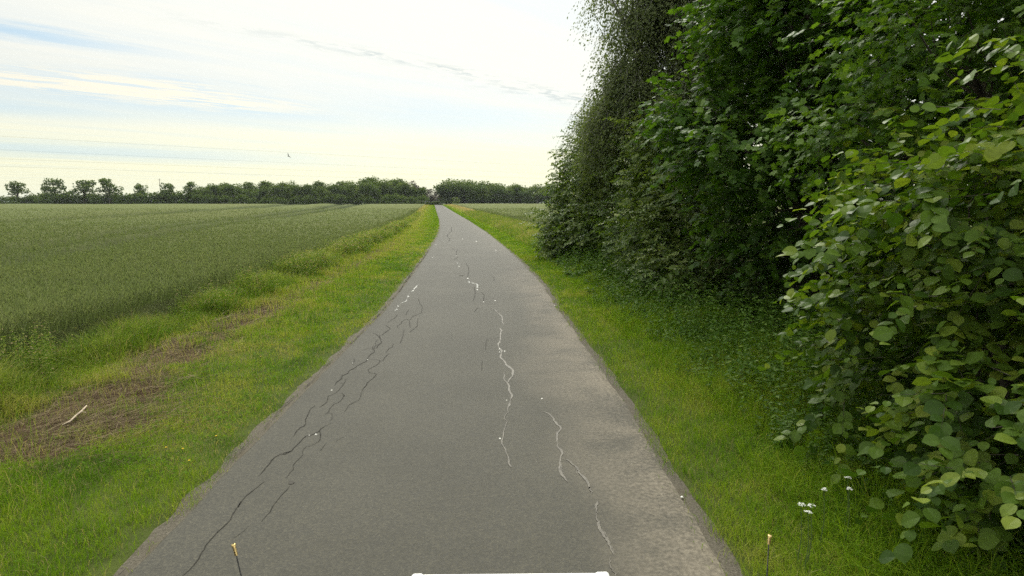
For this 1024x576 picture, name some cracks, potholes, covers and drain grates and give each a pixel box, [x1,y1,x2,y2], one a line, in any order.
crack [447,227,514,467]
crack [541,411,617,576]
crack [118,251,433,576]
